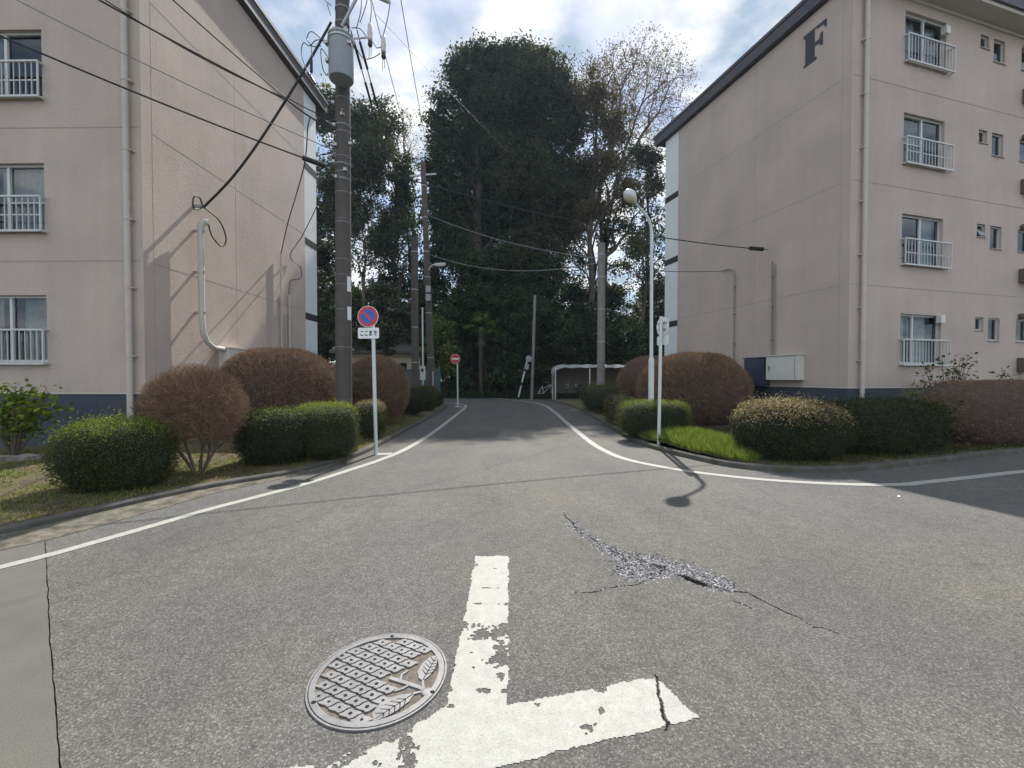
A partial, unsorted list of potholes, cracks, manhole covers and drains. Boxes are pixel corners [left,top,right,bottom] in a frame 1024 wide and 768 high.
crack [563,511,839,634]
crack [654,674,671,731]
pothole [675,574,708,587]
manhole cover [305,633,447,732]
